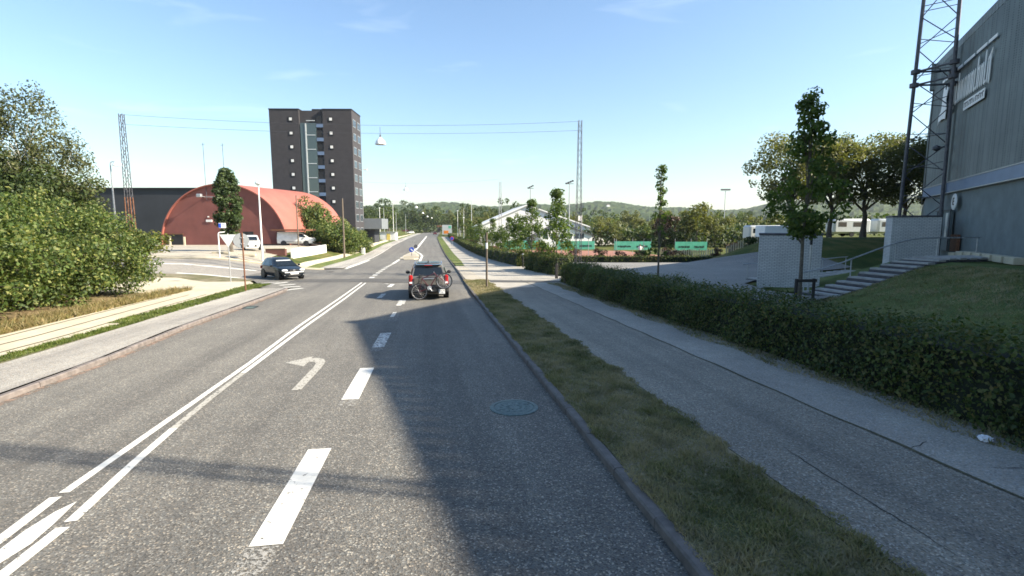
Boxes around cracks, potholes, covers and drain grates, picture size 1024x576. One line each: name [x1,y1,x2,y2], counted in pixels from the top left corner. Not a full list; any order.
manhole cover [490,399,538,416]
